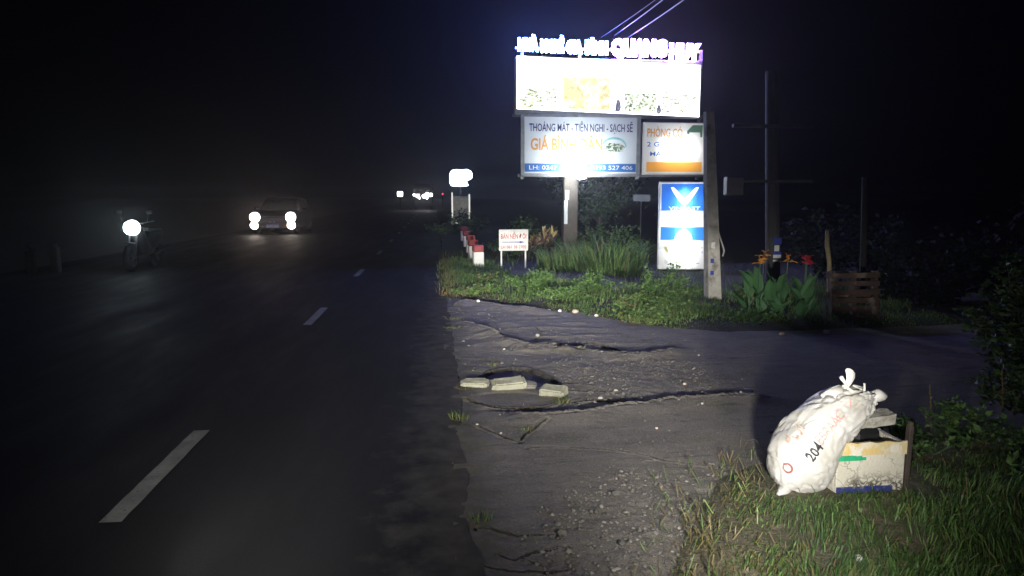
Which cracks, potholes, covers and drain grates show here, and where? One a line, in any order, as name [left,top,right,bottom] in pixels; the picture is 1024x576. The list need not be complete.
pothole [475,366,567,388]
crack [450,298,771,470]
crack [477,525,572,576]
